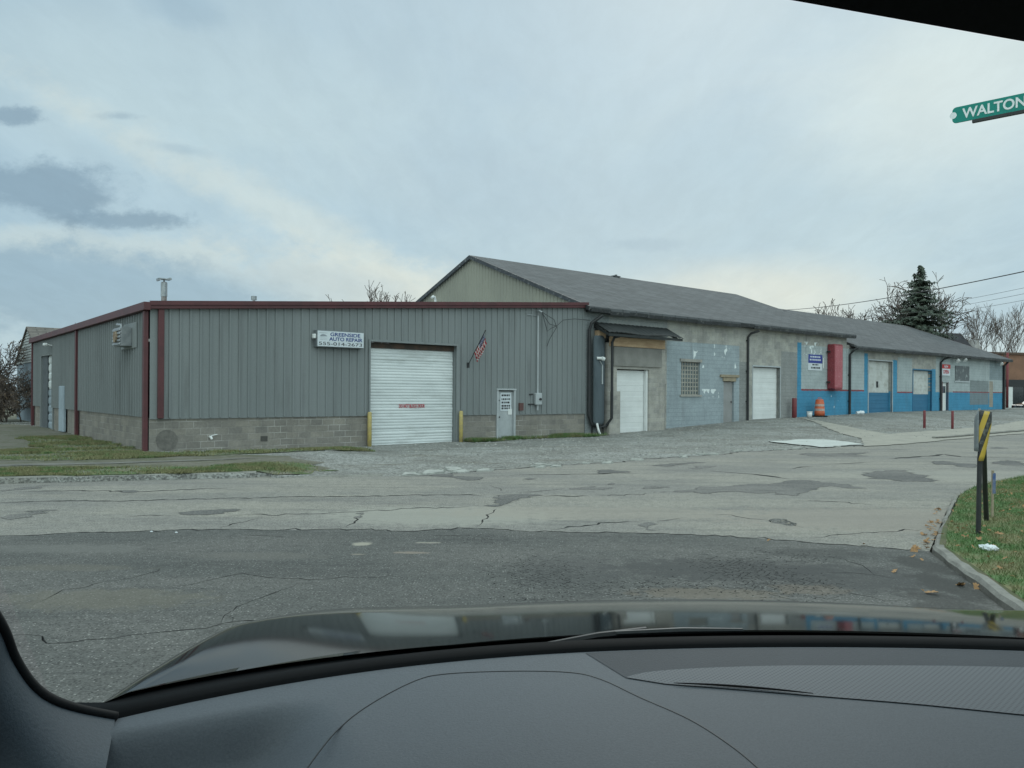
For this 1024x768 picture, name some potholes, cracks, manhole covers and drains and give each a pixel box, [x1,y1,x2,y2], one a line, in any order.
crack [818,529,922,538]
crack [2,488,472,537]
crack [22,573,403,644]
crack [552,518,678,530]
